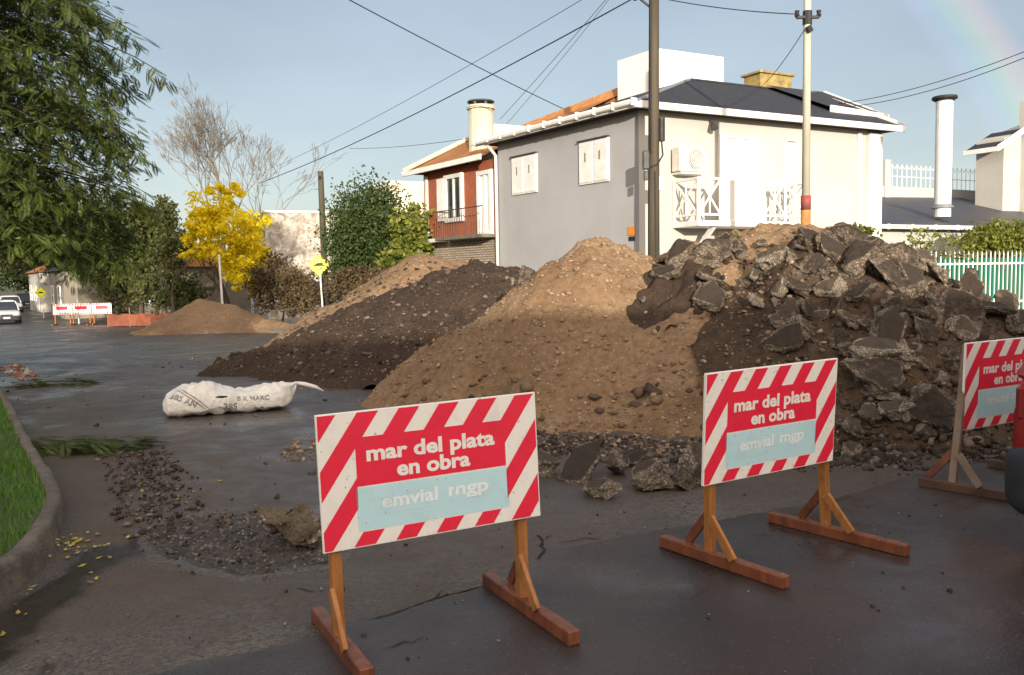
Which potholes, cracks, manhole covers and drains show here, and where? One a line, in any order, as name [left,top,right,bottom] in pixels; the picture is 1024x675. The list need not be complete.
crack [537,534,597,559]
